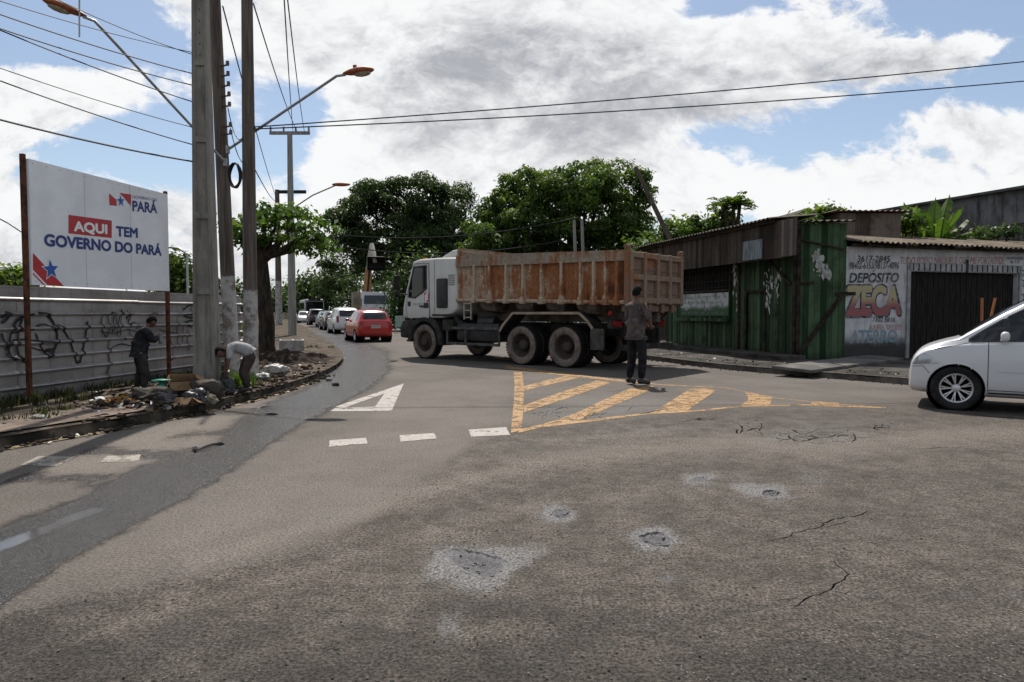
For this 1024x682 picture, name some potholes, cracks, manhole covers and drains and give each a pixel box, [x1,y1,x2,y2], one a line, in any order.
crack [736,420,892,444]
pothole [444,549,510,579]
pothole [639,532,674,547]
crack [771,511,868,541]
pothole [550,509,572,519]
crack [769,561,855,608]
